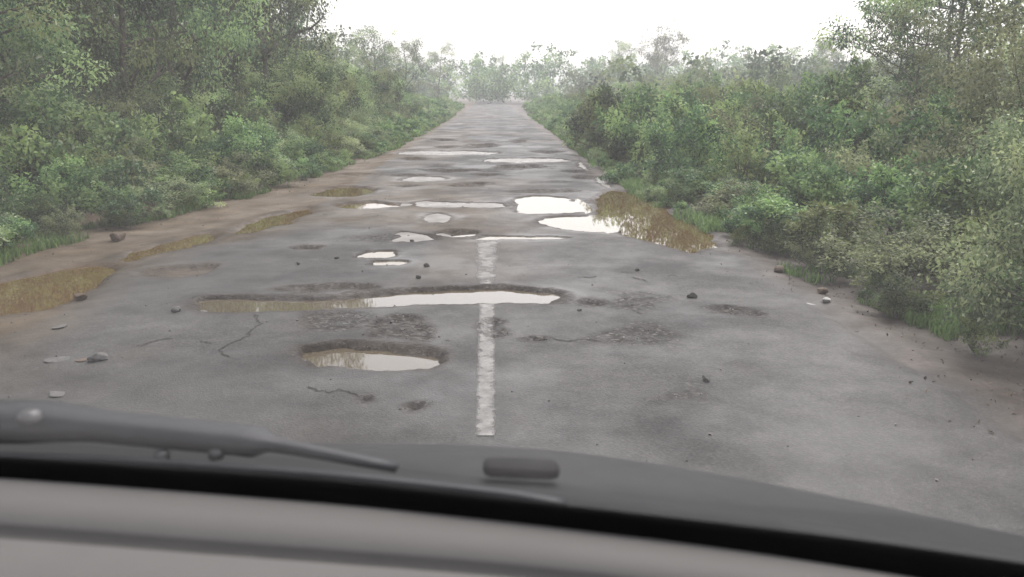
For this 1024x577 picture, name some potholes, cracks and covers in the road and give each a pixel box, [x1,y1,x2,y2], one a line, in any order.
pothole [583,188,726,254]
pothole [390,231,443,242]
pothole [352,249,400,258]
pothole [299,185,382,197]
crack [200,314,263,357]
pothole [408,200,510,209]
crack [308,386,358,395]
pothole [103,228,227,264]
pothole [290,339,452,371]
pothole [418,212,457,224]
pothole [506,195,582,214]
